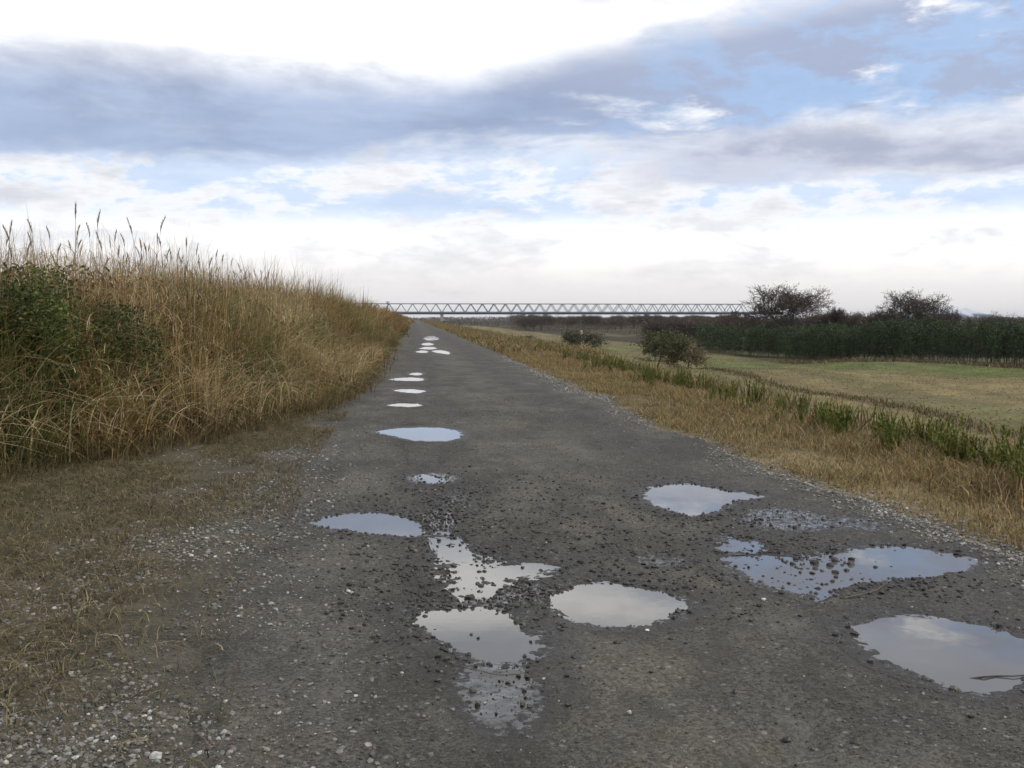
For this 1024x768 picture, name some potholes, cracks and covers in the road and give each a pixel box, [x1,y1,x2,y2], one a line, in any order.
pothole [517,573,712,634]
pothole [824,605,1024,705]
pothole [388,598,569,676]
pothole [399,472,464,486]
pothole [697,533,788,558]
pothole [624,480,780,519]
pothole [413,526,585,610]
pothole [363,426,475,443]
pothole [702,539,1003,607]
pothole [291,507,443,539]
